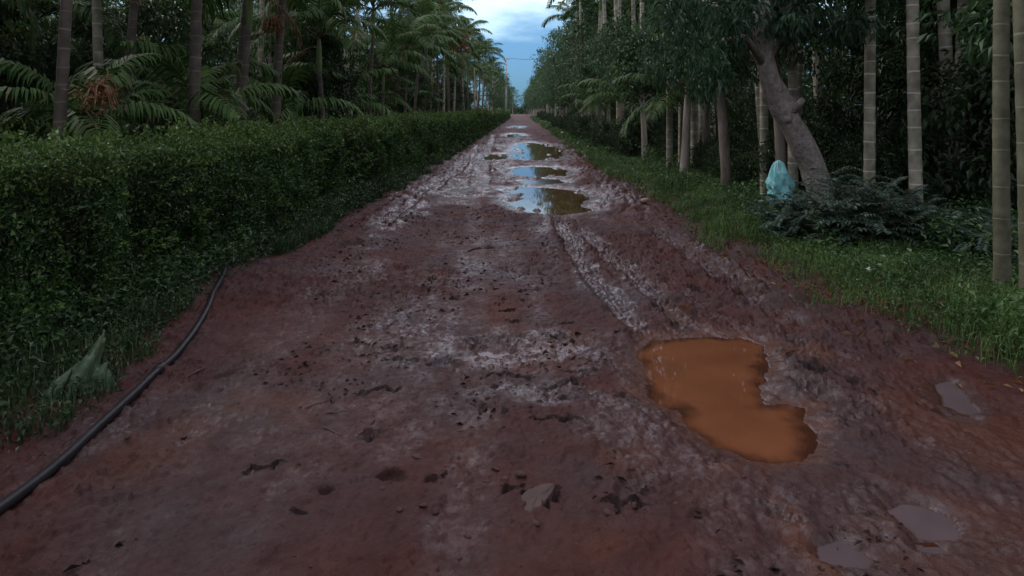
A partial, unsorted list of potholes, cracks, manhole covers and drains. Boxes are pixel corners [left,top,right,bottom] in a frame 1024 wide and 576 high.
pothole [504,141,569,161]
pothole [507,165,575,178]
pothole [498,185,602,216]
pothole [628,330,832,468]
